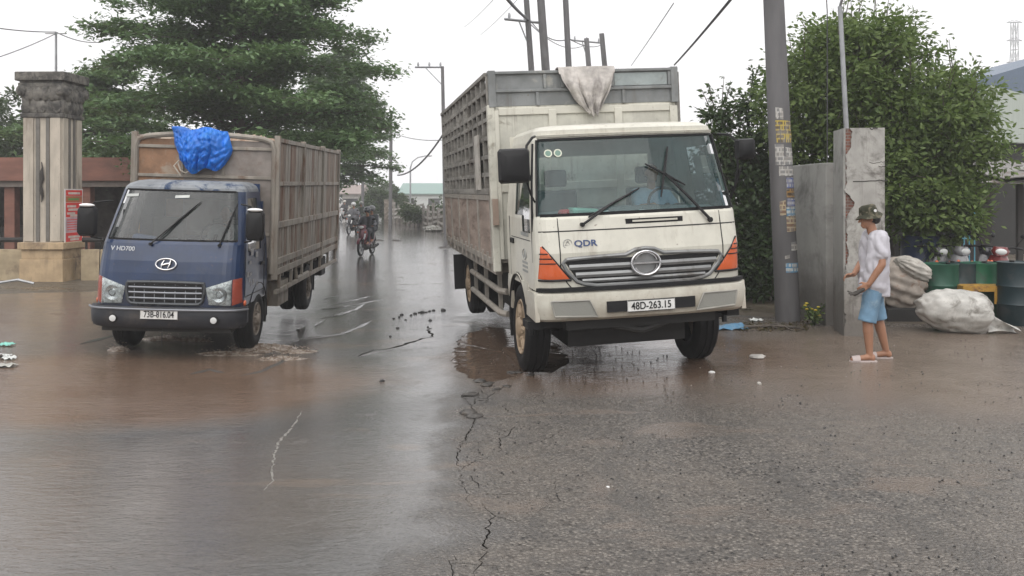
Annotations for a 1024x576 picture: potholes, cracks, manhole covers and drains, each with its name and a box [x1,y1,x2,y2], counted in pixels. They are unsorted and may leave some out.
crack [357,326,434,357]
crack [264,412,301,490]
pothole [451,326,570,382]
crack [448,387,626,576]
